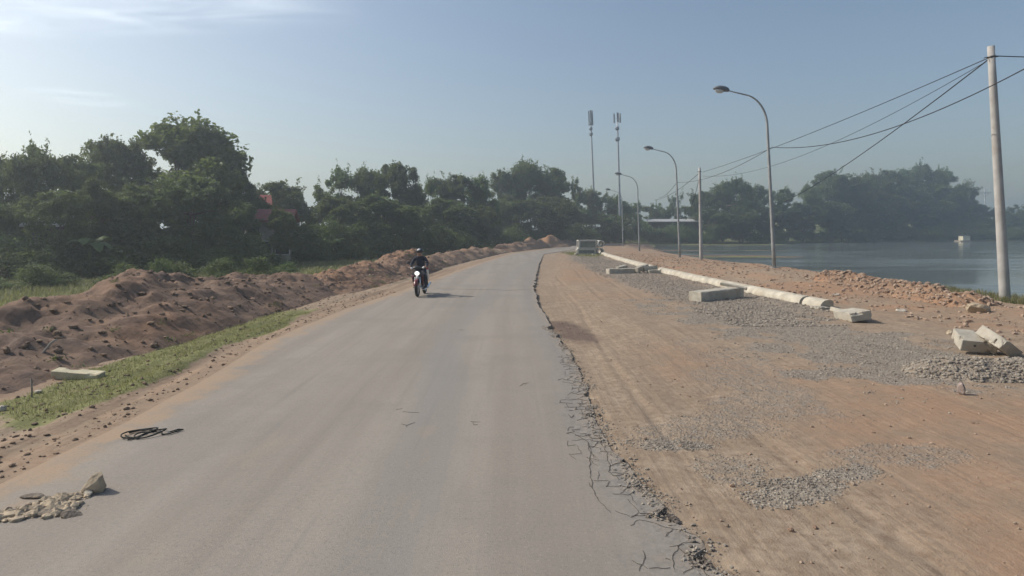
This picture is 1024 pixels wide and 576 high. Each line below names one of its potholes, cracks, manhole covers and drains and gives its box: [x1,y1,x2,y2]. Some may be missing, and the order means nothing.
crack [559,357,710,576]
